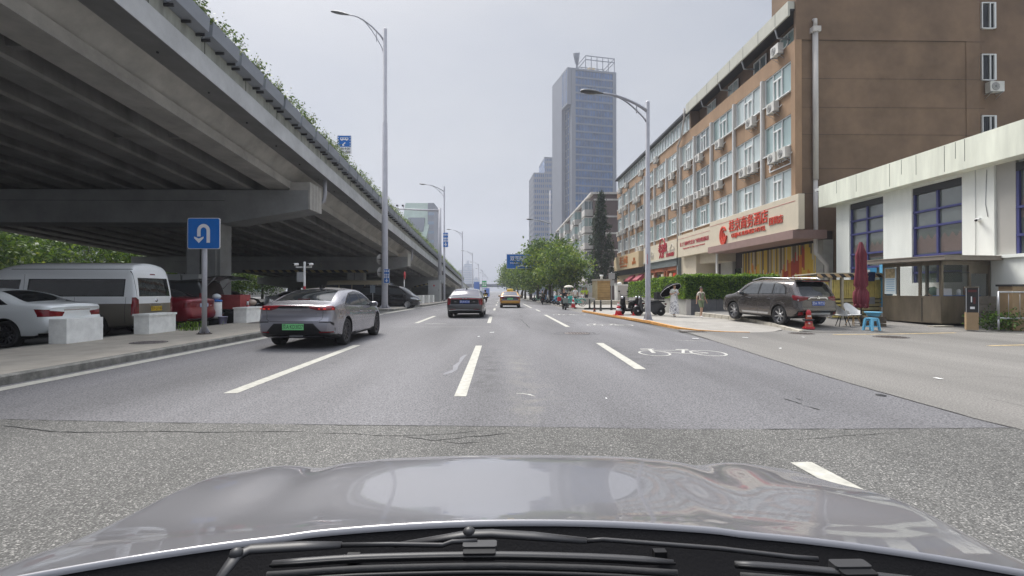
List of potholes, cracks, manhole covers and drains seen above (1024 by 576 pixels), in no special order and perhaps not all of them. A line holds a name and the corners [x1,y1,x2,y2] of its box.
crack [350,431,503,444]
